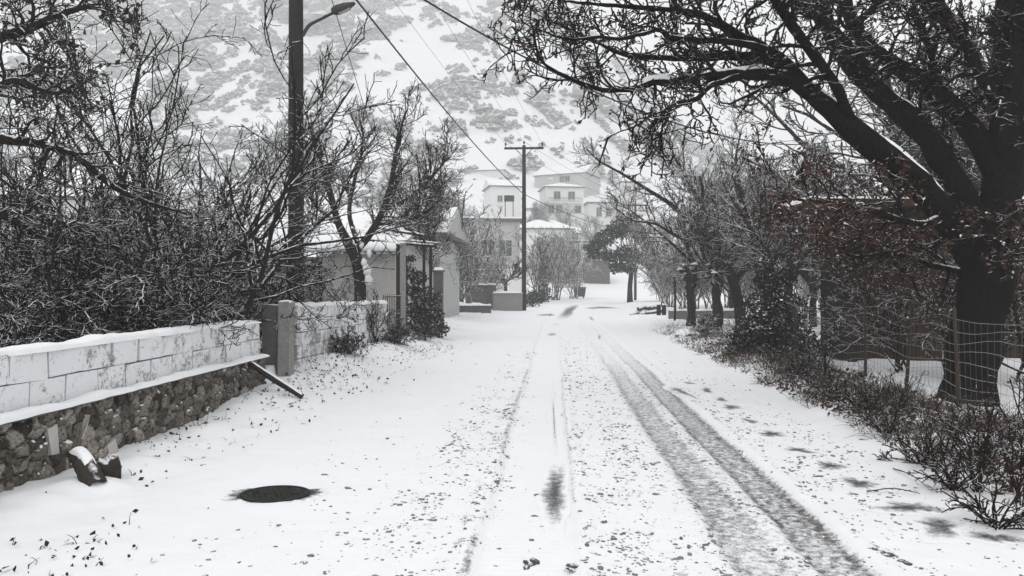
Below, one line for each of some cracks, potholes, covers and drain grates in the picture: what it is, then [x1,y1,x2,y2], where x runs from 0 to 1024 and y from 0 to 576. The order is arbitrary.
manhole cover [221,485,333,504]
